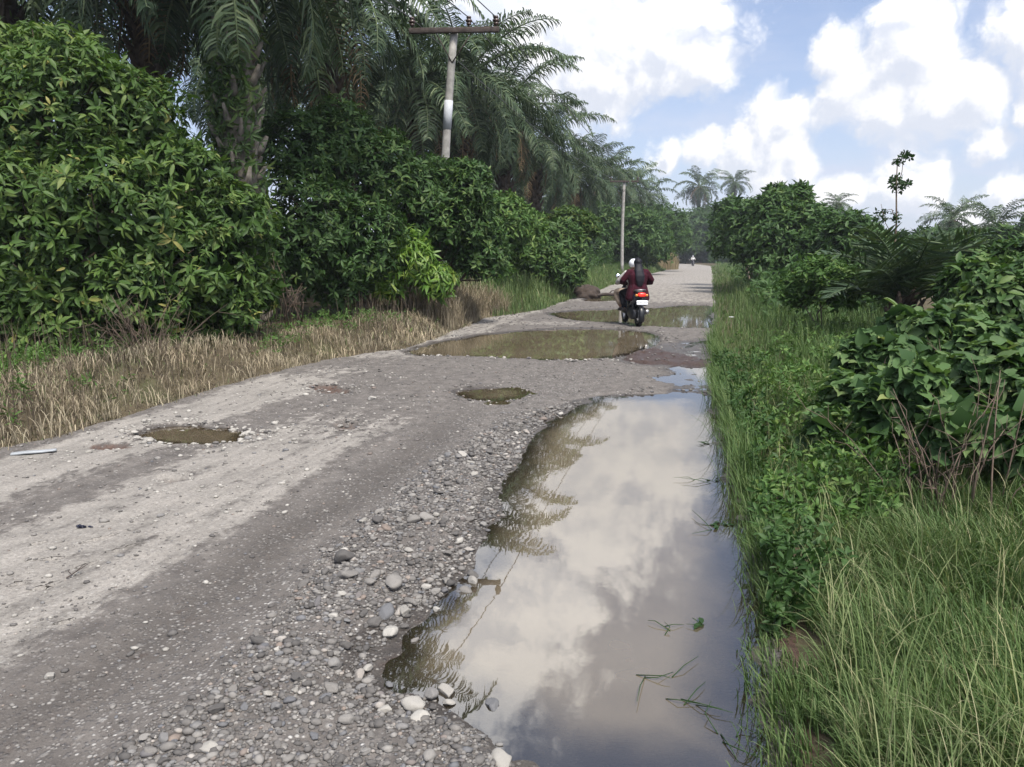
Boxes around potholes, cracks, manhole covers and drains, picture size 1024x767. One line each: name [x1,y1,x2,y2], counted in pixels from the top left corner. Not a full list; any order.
pothole [399,326,660,360]
pothole [316,389,814,767]
pothole [447,385,532,402]
pothole [543,304,720,328]
pothole [127,422,258,445]
